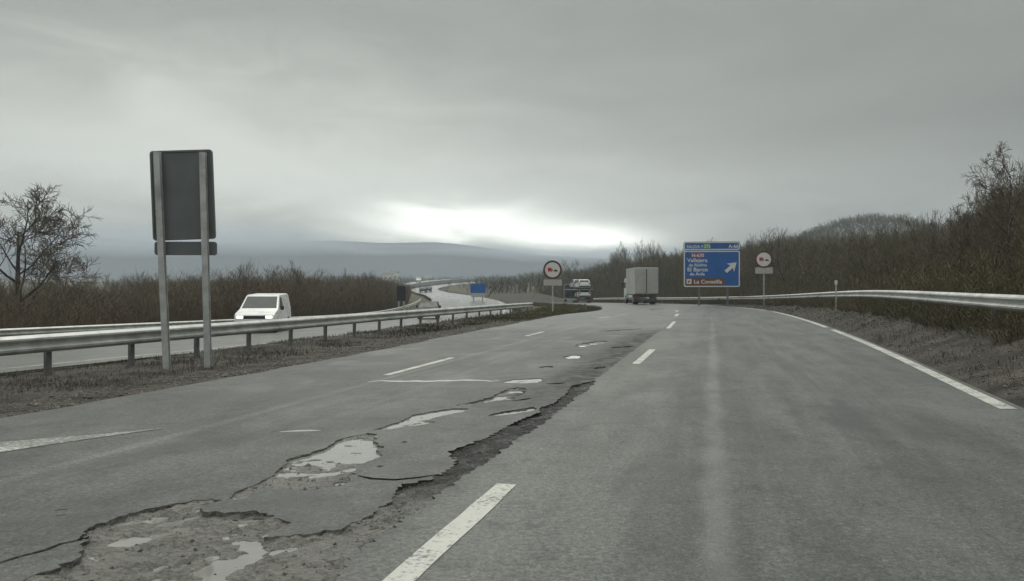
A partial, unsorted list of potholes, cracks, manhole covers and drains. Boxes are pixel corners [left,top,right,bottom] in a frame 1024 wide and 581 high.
pothole [23,381,597,581]
